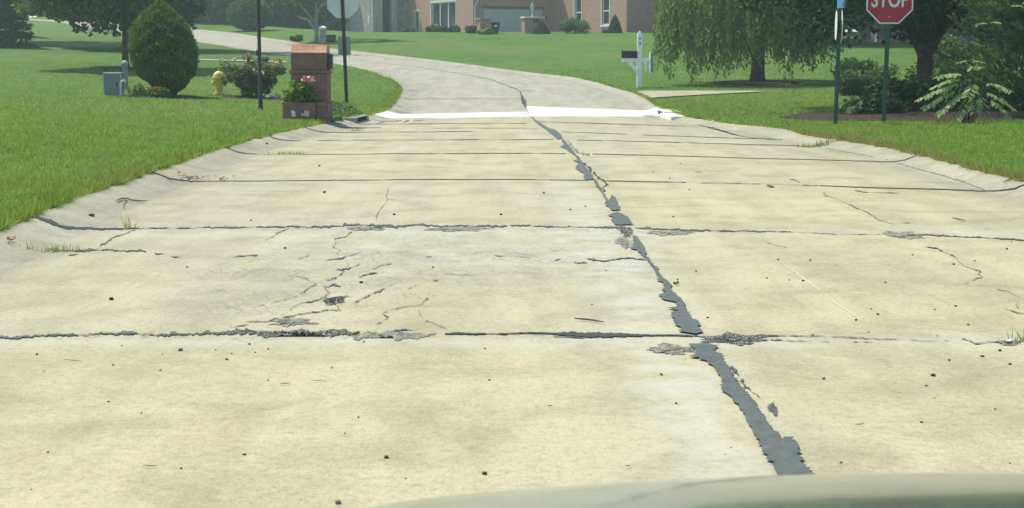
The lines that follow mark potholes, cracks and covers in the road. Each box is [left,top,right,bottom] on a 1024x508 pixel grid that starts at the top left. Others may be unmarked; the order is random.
crack [924,246,982,283]
crack [824,190,911,225]
crack [0,231,477,339]
pothole [697,332,768,346]
pothole [268,318,318,327]
